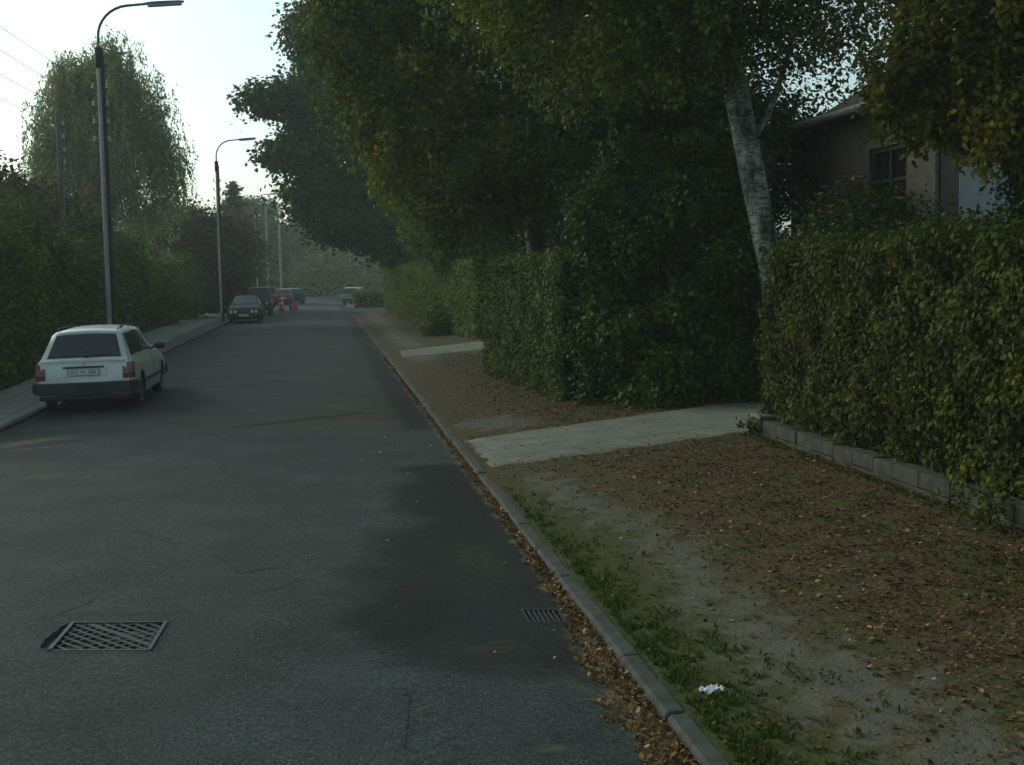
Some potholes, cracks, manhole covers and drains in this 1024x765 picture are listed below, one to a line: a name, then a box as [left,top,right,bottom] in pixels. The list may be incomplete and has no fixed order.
drain grate [521,609,568,623]
